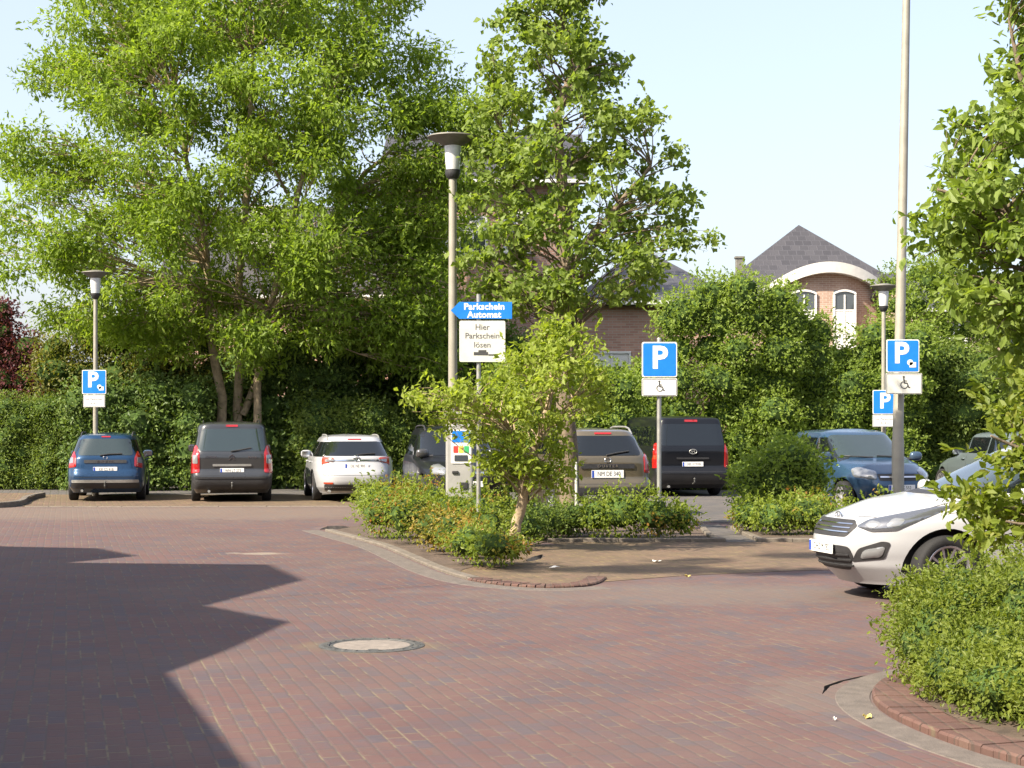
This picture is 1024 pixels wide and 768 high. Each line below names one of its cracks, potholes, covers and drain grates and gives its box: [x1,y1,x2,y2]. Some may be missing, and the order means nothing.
manhole cover [319,638,425,653]
